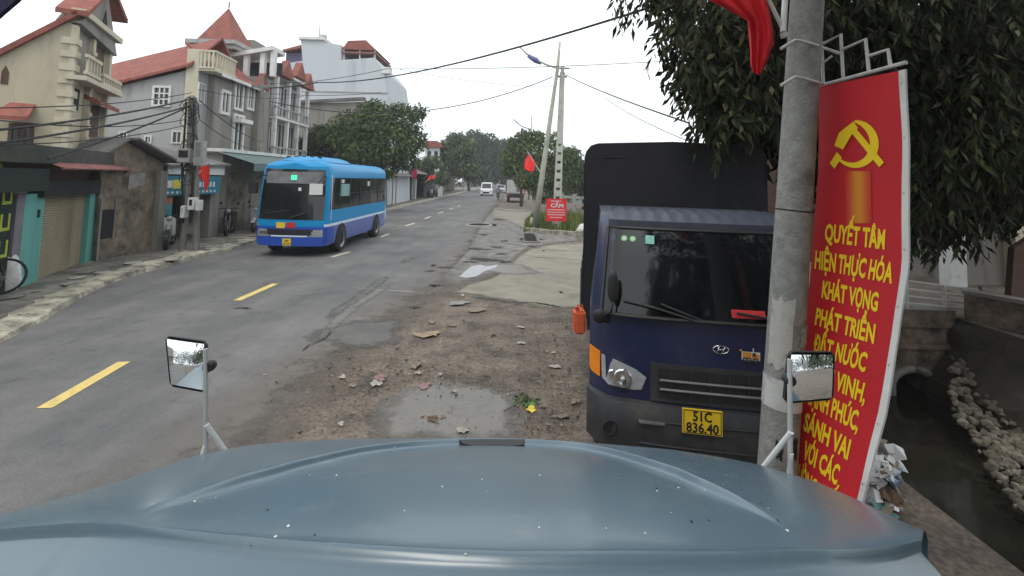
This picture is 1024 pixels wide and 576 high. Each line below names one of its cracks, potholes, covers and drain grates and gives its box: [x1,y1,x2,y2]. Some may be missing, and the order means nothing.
drain grate [520,233,540,243]
